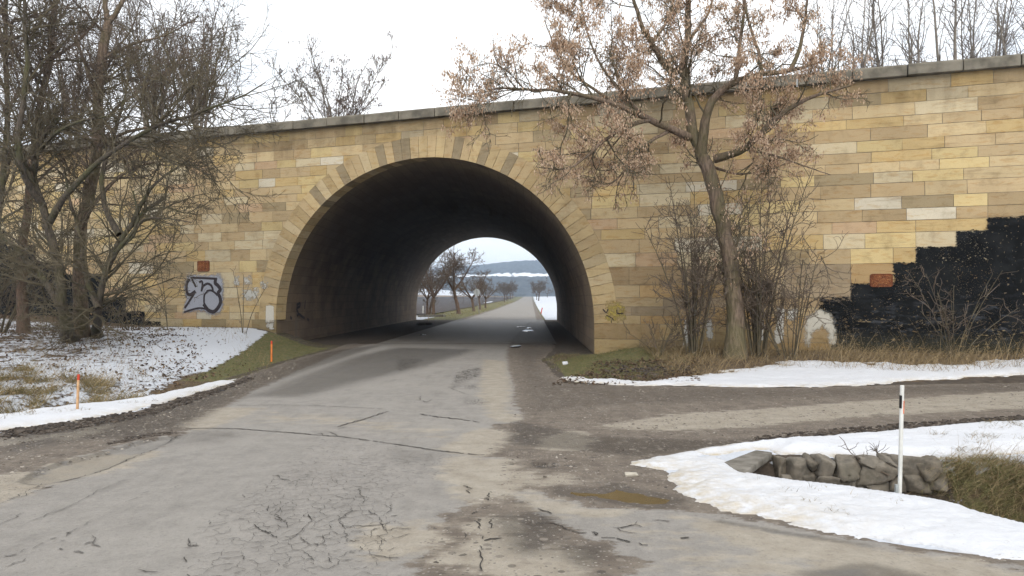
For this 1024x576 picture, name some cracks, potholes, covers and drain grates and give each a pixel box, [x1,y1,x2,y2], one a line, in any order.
pothole [545,480,696,512]
crack [463,484,498,570]
crack [2,436,178,523]
crack [187,411,454,576]
crack [538,508,689,545]
